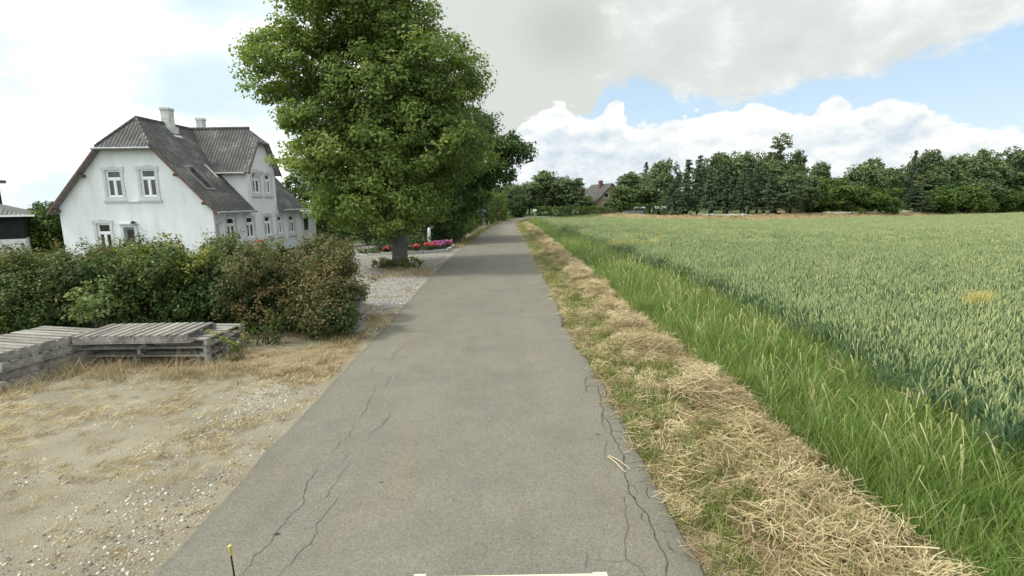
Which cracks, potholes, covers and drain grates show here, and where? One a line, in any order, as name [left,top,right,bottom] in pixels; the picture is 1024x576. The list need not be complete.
crack [560,316,675,576]
crack [244,369,399,576]
